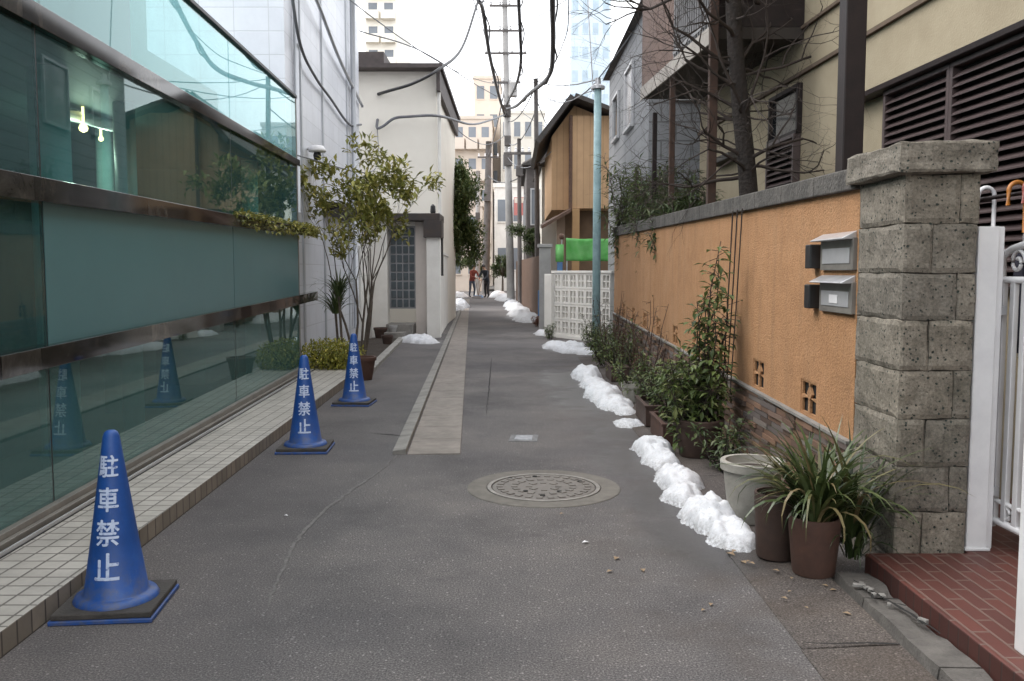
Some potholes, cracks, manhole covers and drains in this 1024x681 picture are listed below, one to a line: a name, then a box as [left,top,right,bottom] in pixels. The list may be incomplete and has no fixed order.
manhole cover [509,434,538,442]
manhole cover [467,470,620,508]
